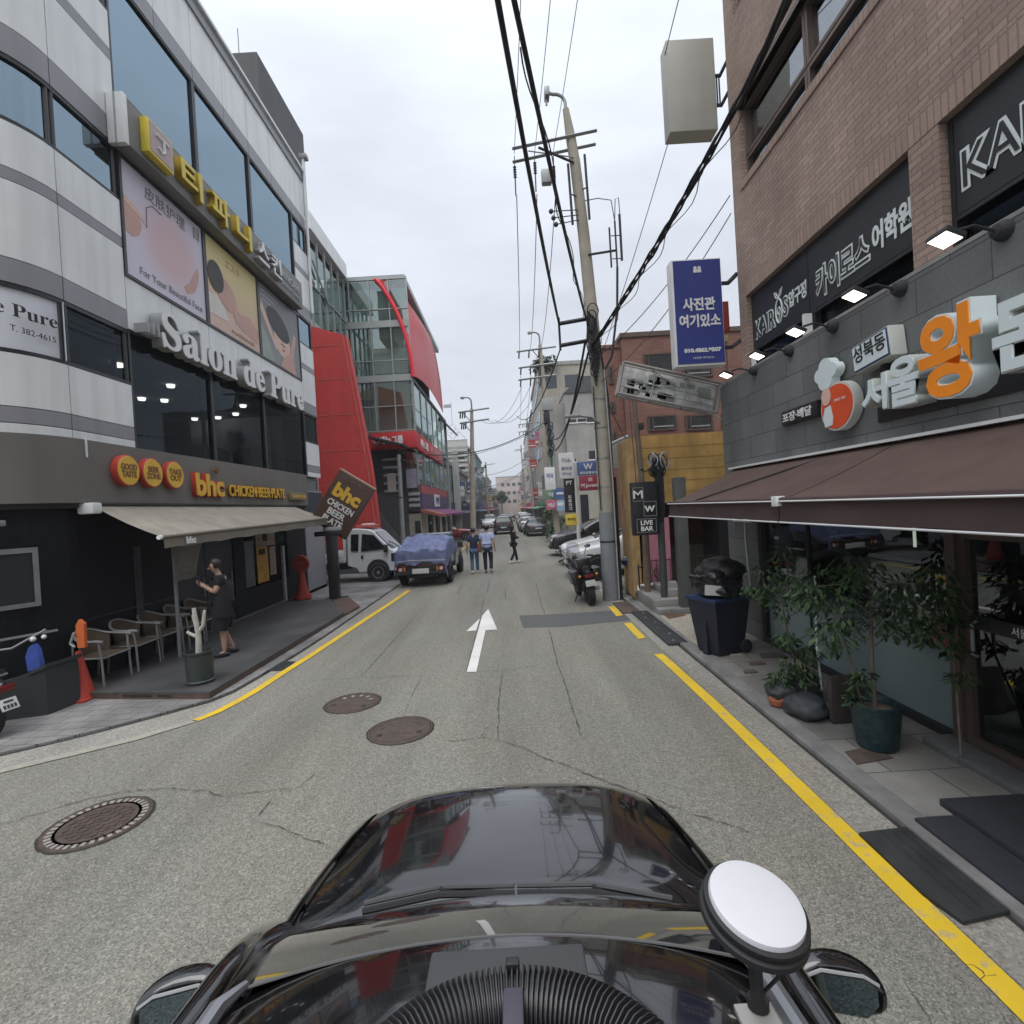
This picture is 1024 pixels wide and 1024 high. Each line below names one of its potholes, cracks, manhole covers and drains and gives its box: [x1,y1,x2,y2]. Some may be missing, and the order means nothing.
crack [0,775,321,843]
manhole cover [323,692,382,714]
manhole cover [366,716,434,746]
manhole cover [34,796,157,855]
crack [450,602,758,835]
